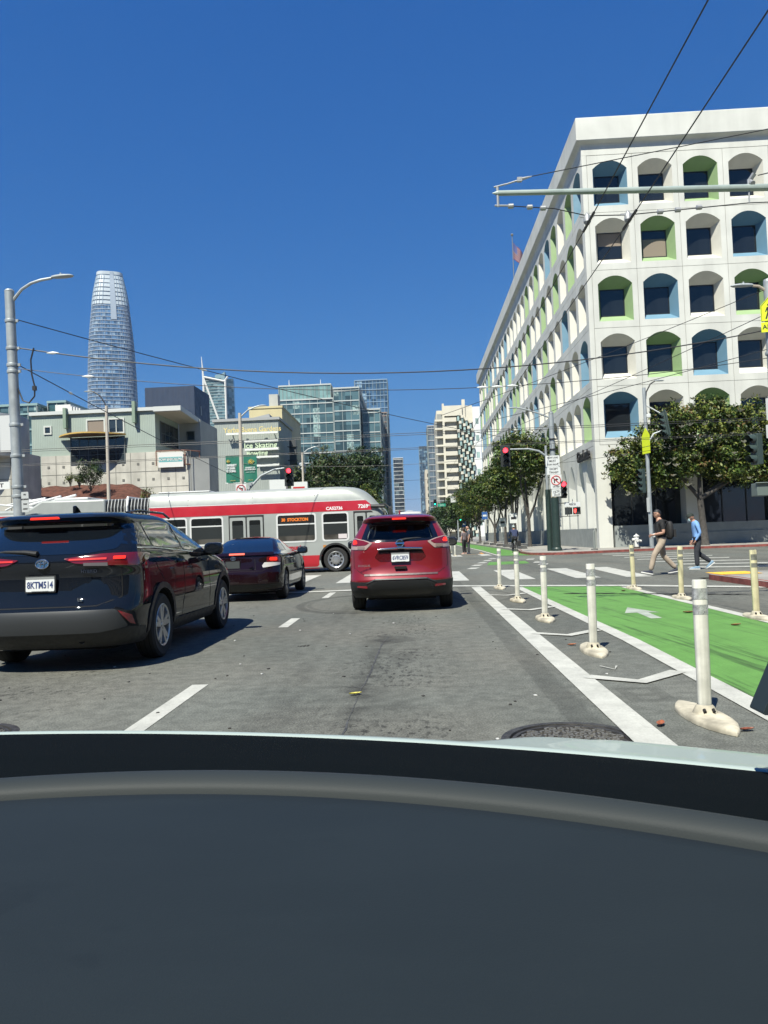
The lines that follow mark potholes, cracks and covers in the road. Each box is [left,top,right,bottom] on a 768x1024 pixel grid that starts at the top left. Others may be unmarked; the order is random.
crack [342,636,401,735]
manhole cover [501,722,634,742]
